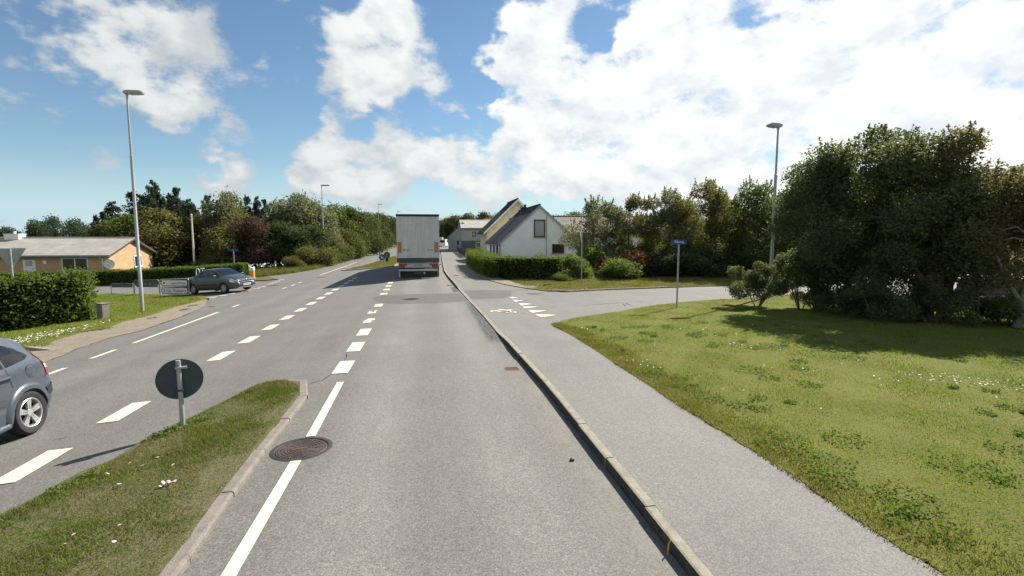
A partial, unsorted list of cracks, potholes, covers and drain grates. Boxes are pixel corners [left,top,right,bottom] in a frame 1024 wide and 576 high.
manhole cover [269,437,333,462]
